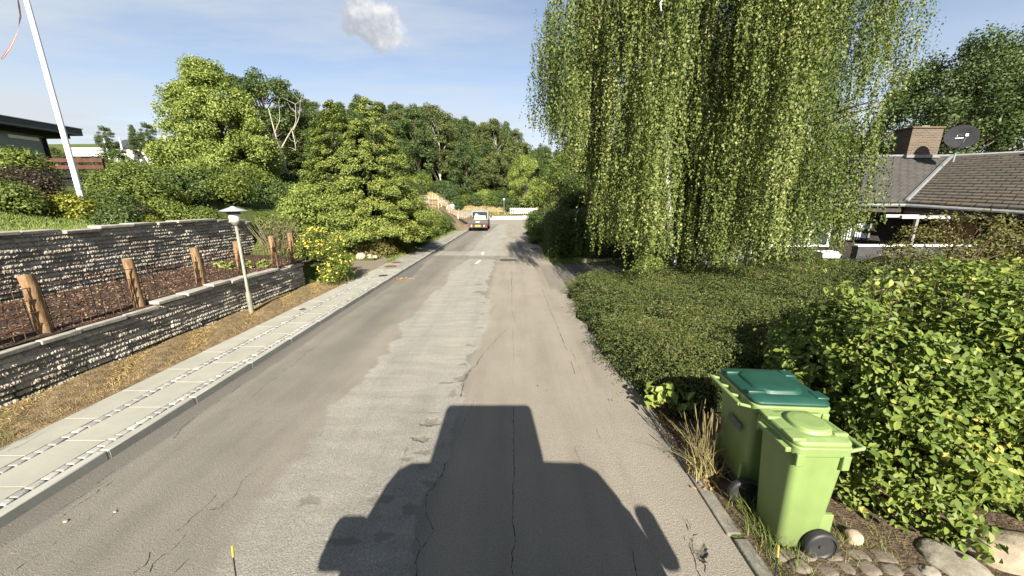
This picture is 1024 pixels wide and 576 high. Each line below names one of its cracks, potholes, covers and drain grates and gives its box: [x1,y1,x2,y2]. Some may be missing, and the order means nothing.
crack [683,518,706,575]
crack [134,464,264,573]
crack [415,464,445,576]
crack [452,304,516,428]
